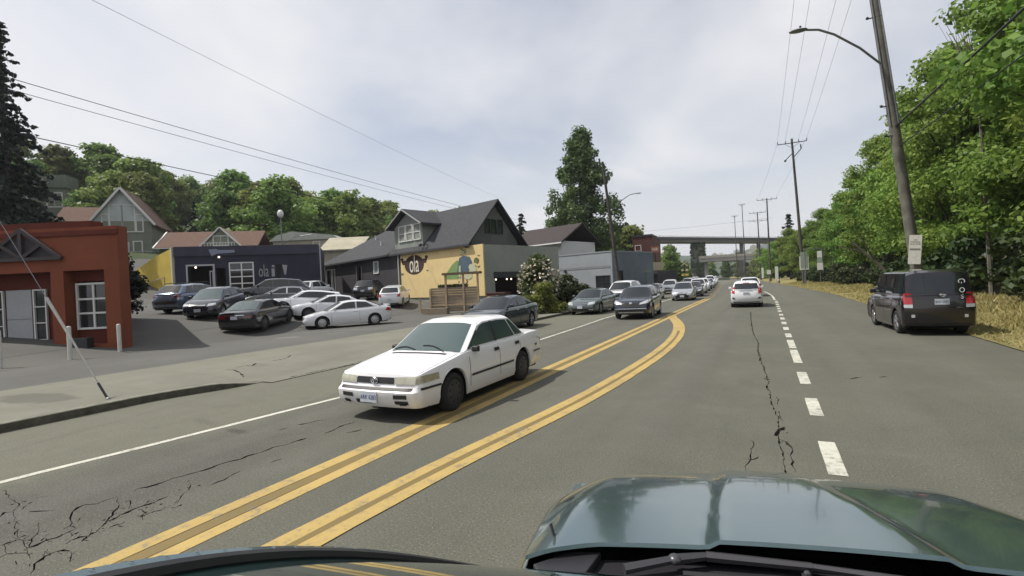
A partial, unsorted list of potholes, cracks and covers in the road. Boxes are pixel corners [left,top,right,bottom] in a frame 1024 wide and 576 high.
crack [750,312,795,473]
crack [0,438,306,575]
